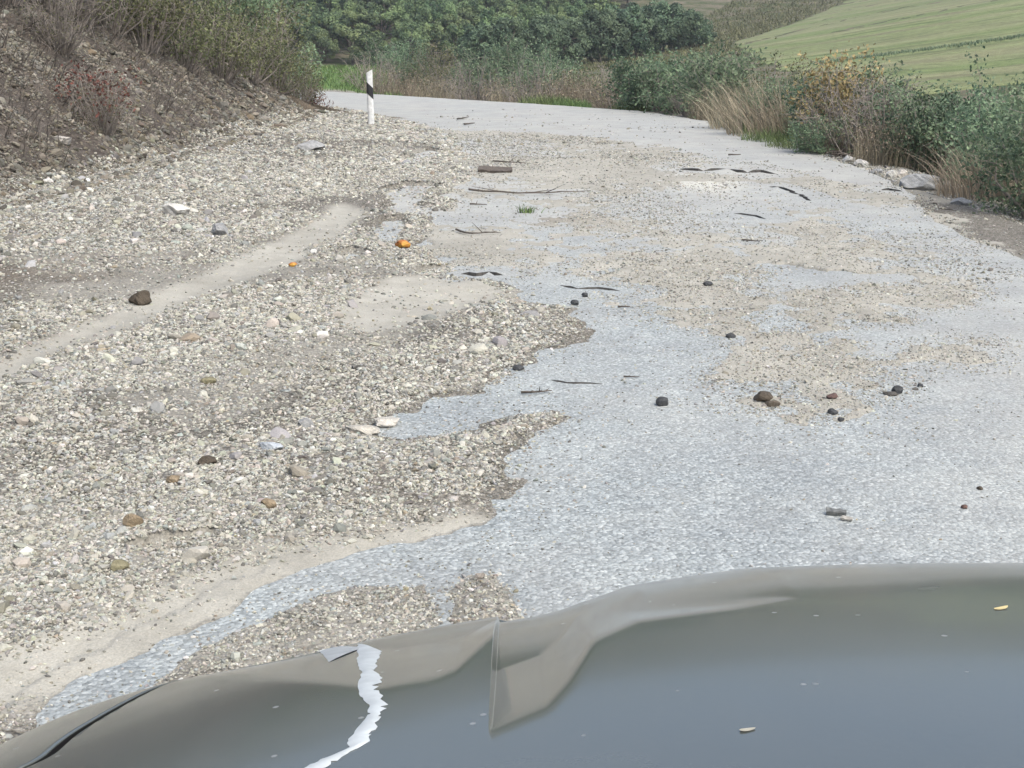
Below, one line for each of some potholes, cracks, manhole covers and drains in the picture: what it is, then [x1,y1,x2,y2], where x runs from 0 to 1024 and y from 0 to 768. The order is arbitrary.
crack [681,168,811,201]
